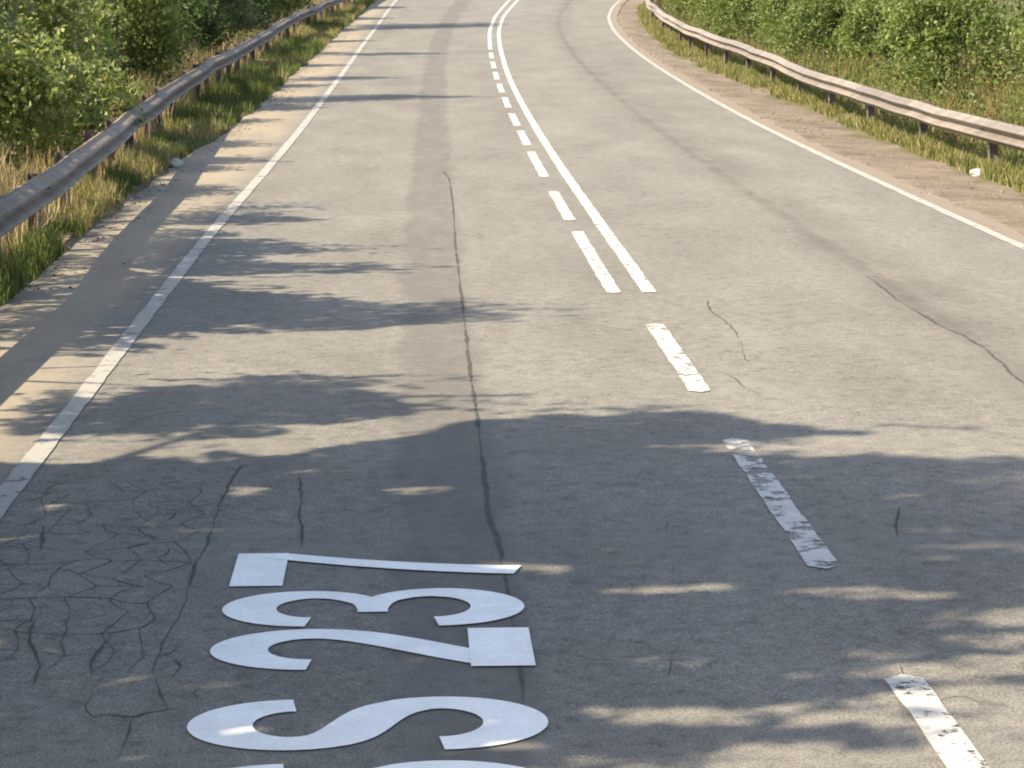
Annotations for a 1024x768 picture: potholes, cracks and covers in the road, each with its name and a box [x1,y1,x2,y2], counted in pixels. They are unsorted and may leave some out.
crack [707,300,763,397]
crack [443,171,524,698]
crack [0,464,242,760]
